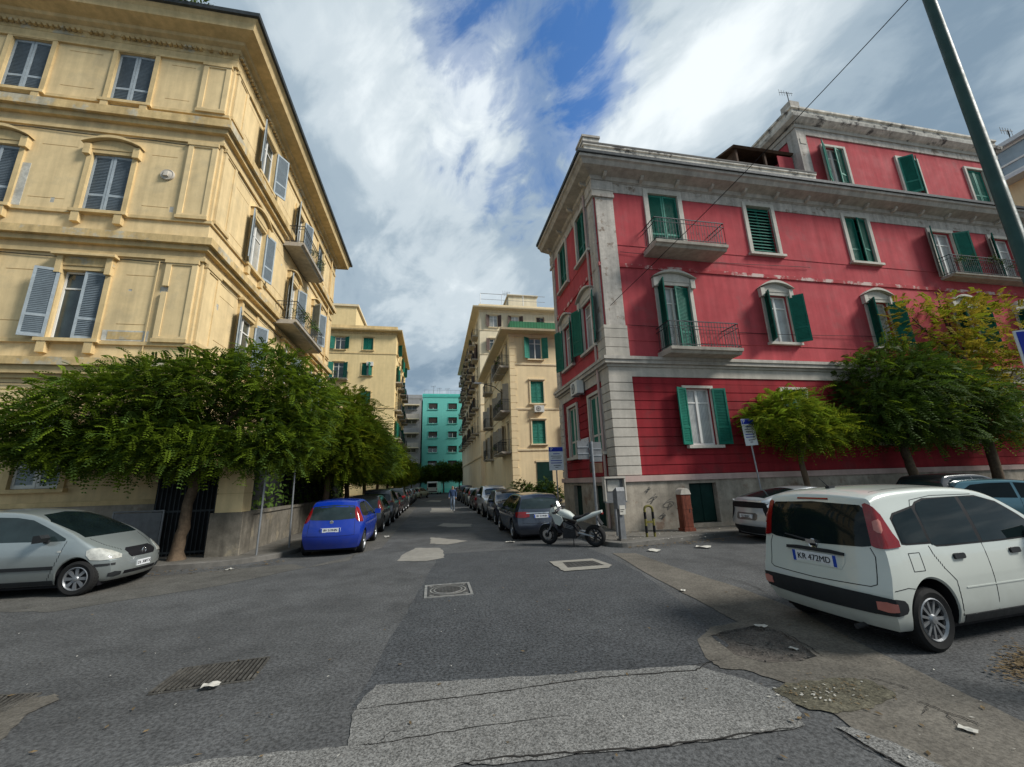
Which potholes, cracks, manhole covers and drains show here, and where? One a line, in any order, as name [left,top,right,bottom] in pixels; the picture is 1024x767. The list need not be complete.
pothole [713,625,817,663]
crack [349,660,713,711]
manhole cover [424,582,474,599]
crack [356,715,795,763]
crack [871,677,984,732]
drain grate [147,656,270,696]
